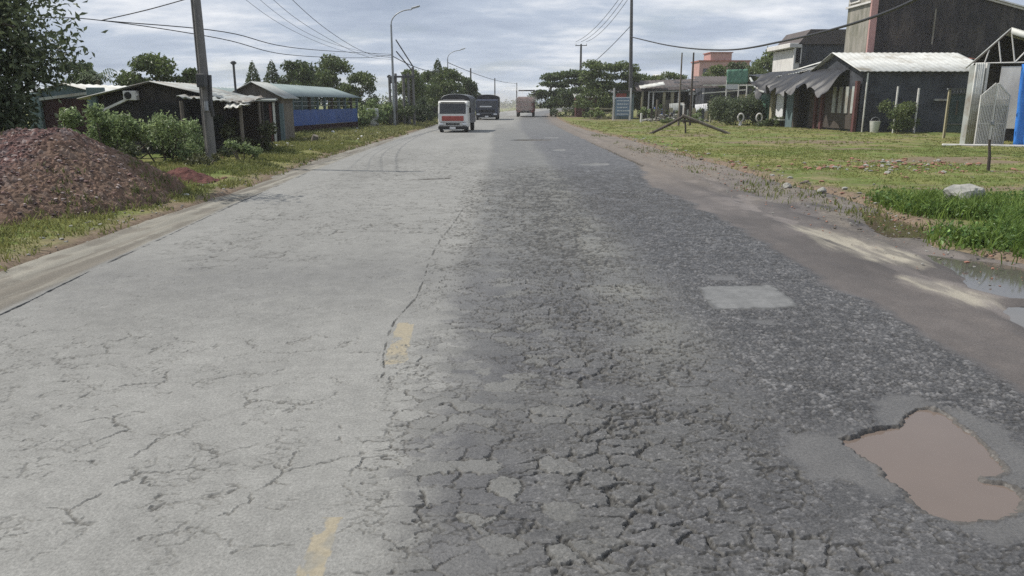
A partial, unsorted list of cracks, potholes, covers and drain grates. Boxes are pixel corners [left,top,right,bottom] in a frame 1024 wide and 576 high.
pothole [837,405,1024,525]
crack [0,142,1024,576]
